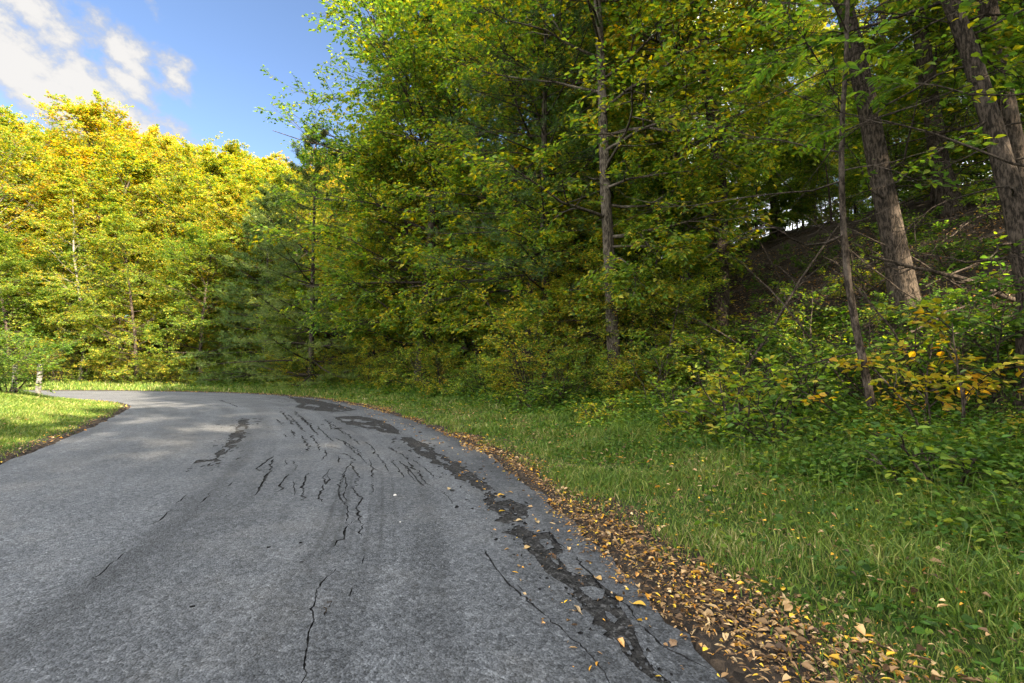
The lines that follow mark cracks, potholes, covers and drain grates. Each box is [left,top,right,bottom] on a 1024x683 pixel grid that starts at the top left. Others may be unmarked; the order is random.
crack [88,483,232,586]
crack [485,531,715,683]
crack [254,410,453,683]
